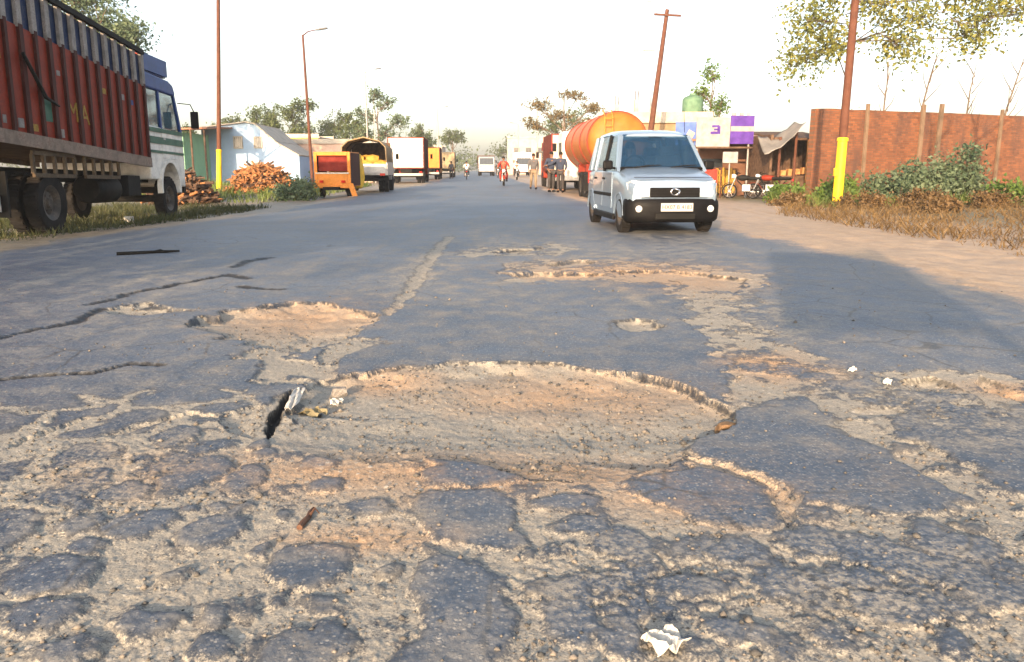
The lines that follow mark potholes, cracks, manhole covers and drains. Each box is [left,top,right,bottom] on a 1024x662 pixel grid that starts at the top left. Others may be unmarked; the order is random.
pothole [547,259,596,268]
crack [686,456,797,530]
crack [0,257,286,340]
pothole [901,376,971,395]
pothole [975,375,1024,403]
pothole [187,301,382,353]
pothole [604,268,753,293]
pothole [489,247,543,255]
crack [8,411,219,447]
pothole [268,360,737,485]
pothole [612,317,664,332]
crack [0,362,166,381]
